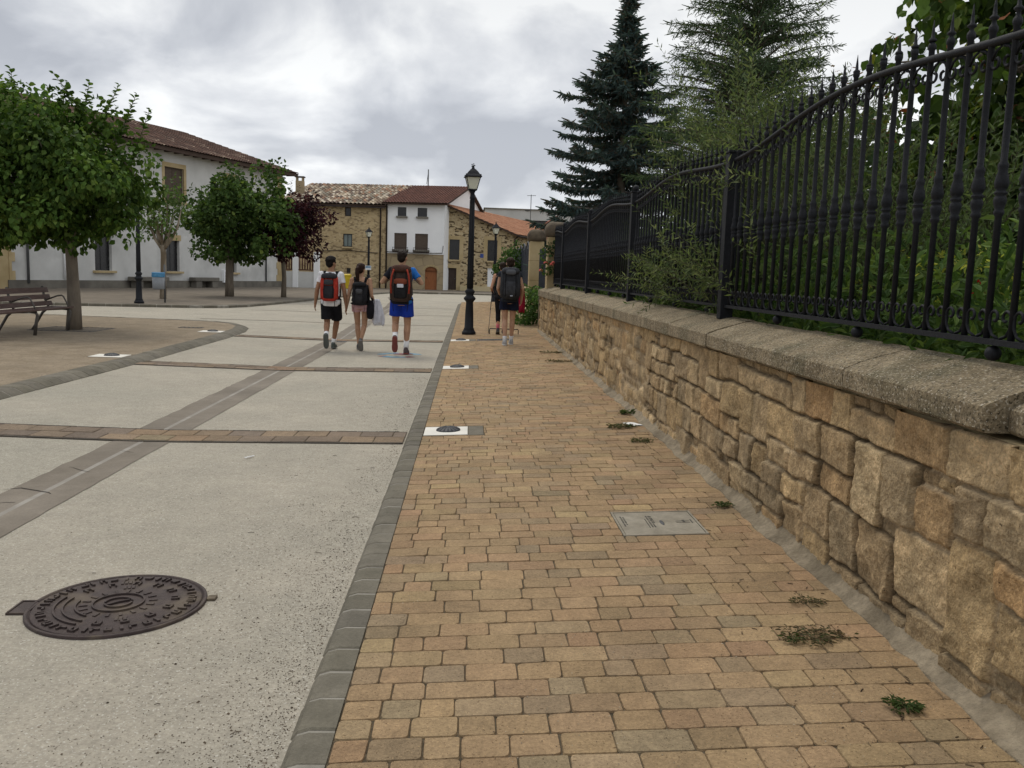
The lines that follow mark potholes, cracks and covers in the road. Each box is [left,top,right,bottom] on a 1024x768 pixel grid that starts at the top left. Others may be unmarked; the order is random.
utility cover [610,510,709,537]
manhole cover [5,574,218,640]
